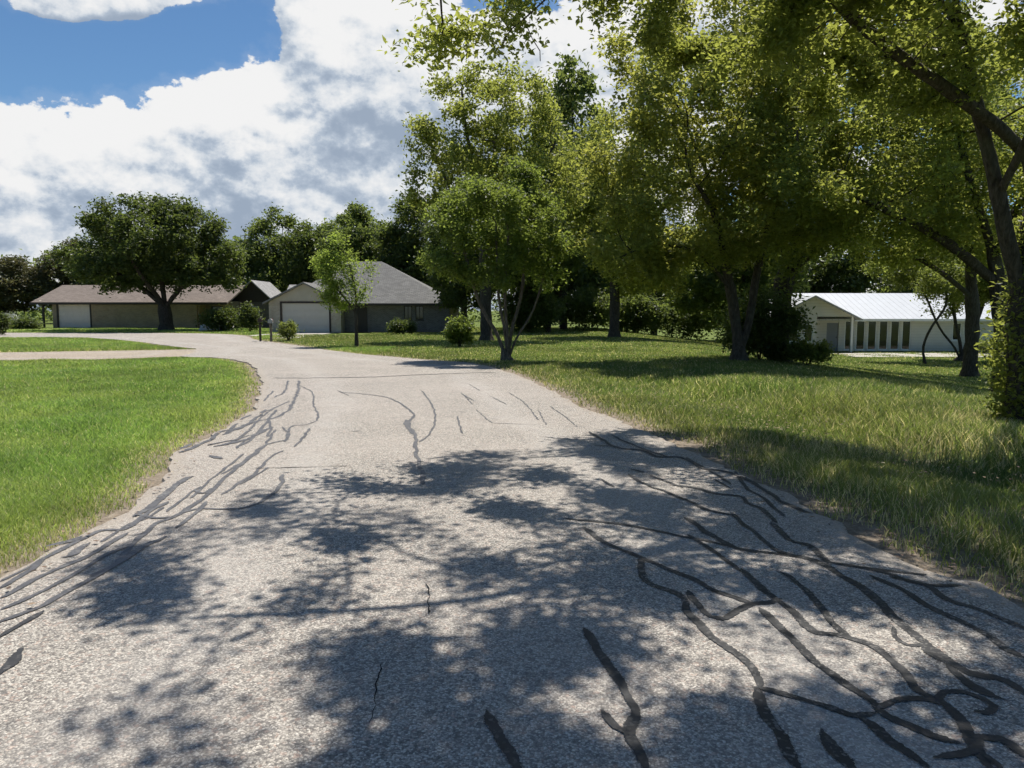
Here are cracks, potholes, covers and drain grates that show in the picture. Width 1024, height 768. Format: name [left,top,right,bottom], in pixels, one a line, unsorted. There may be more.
crack [461,385,588,440]
crack [369,664,382,722]
